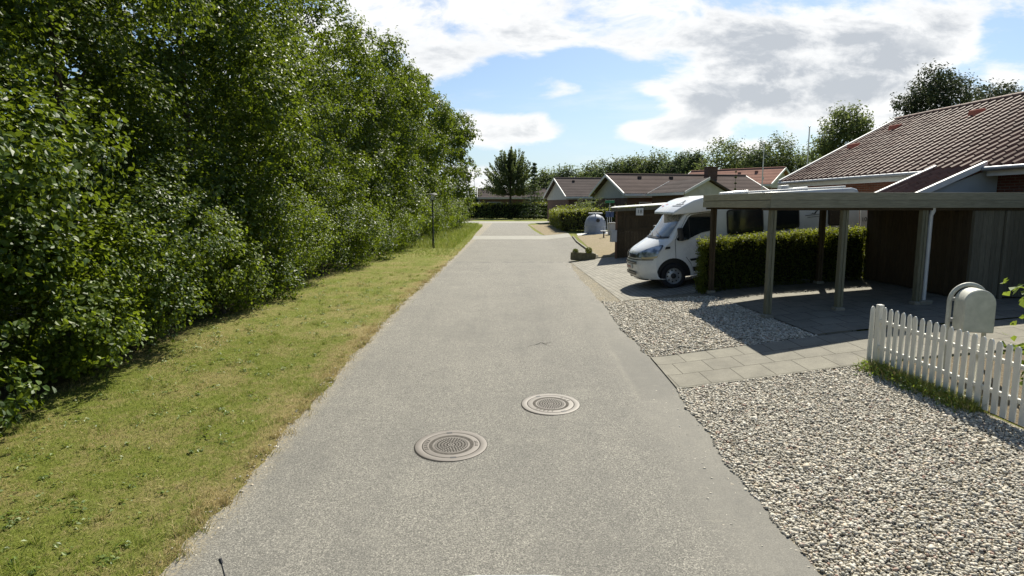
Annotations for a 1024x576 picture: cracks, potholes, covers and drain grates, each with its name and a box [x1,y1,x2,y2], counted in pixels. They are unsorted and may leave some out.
manhole cover [521,393,580,415]
manhole cover [414,430,488,462]
